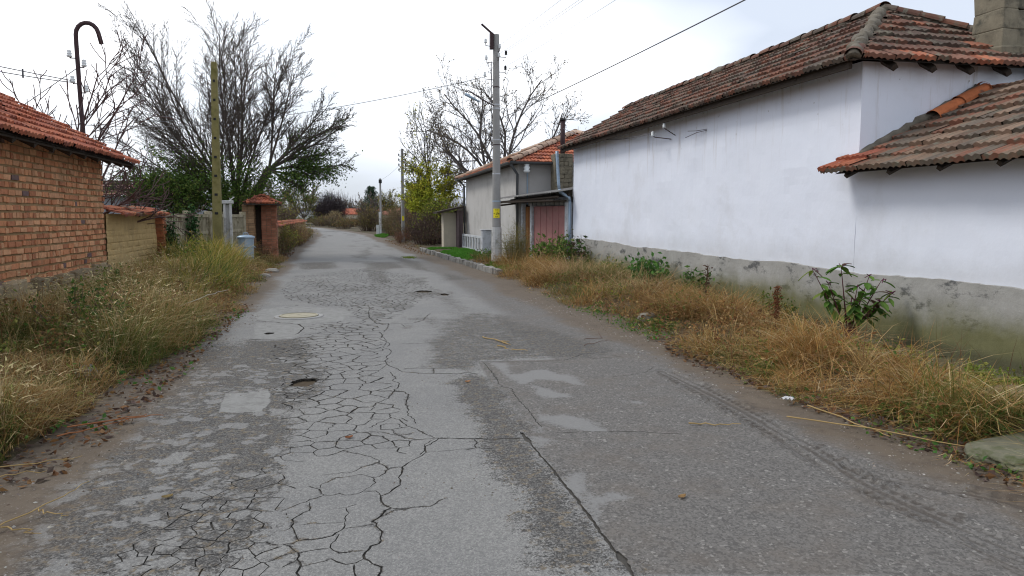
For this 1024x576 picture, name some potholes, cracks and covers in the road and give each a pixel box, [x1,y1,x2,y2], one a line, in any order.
manhole cover [274,312,323,320]
crack [102,269,542,576]
